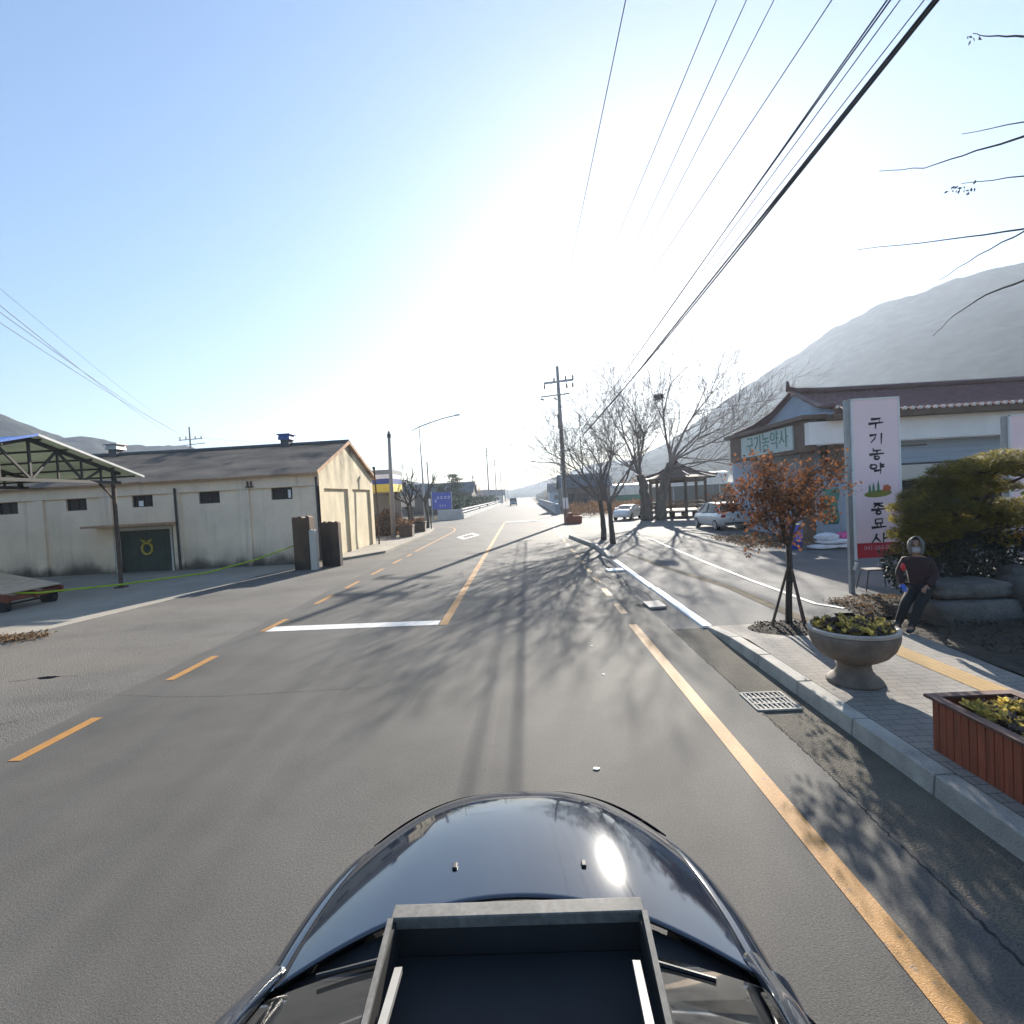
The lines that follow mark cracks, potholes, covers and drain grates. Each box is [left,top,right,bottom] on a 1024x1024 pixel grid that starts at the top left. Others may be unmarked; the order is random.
manhole cover [636,600,667,610]
drain grate [739,691,802,712]
